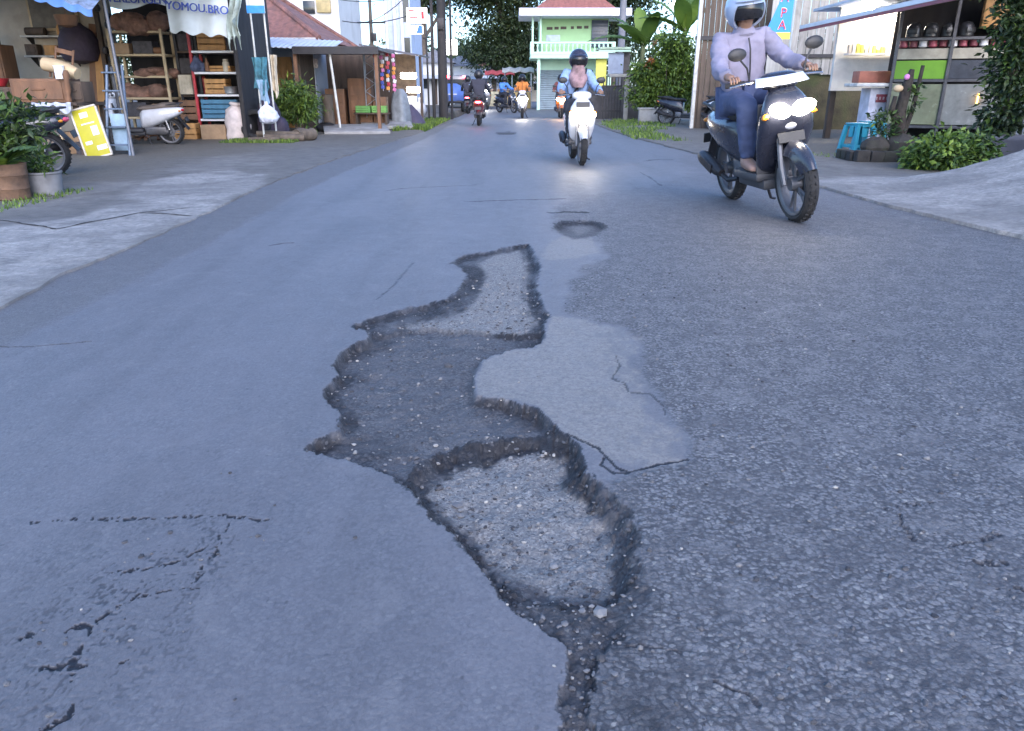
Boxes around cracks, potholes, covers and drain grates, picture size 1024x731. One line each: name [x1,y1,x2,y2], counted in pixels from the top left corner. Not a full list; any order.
pothole [303,243,647,731]
crack [18,513,270,731]
pothole [550,219,610,241]
crack [3,208,189,229]
crack [566,355,690,475]
crack [882,501,937,542]
crack [947,533,1024,594]
crack [375,262,416,300]
